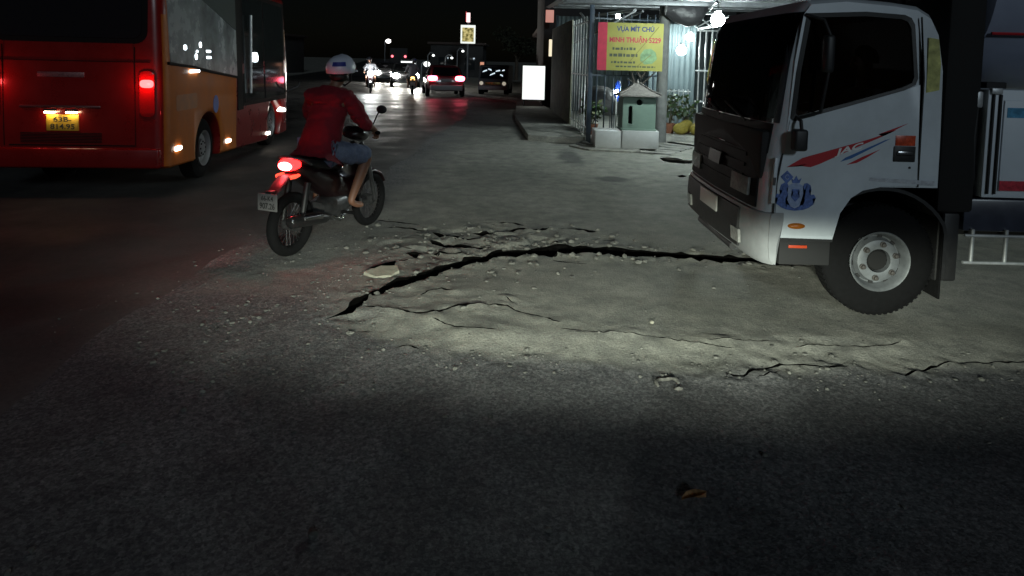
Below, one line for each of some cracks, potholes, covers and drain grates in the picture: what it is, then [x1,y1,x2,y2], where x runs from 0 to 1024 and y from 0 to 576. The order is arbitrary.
crack [725,340,1024,377]
crack [324,220,789,348]
